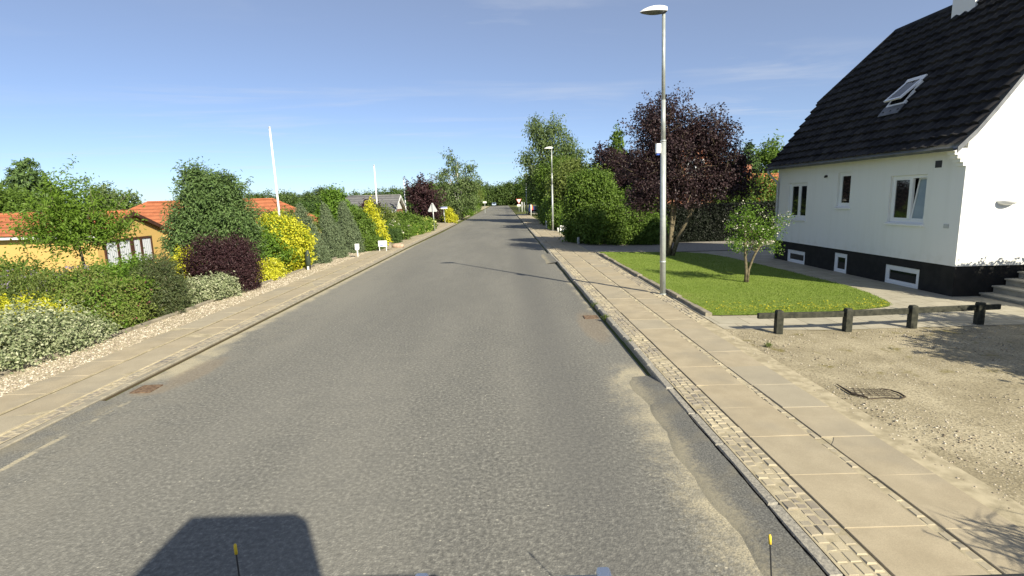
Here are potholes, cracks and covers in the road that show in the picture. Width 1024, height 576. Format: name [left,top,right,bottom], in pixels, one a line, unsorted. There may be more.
drain grate [836,384,906,400]
